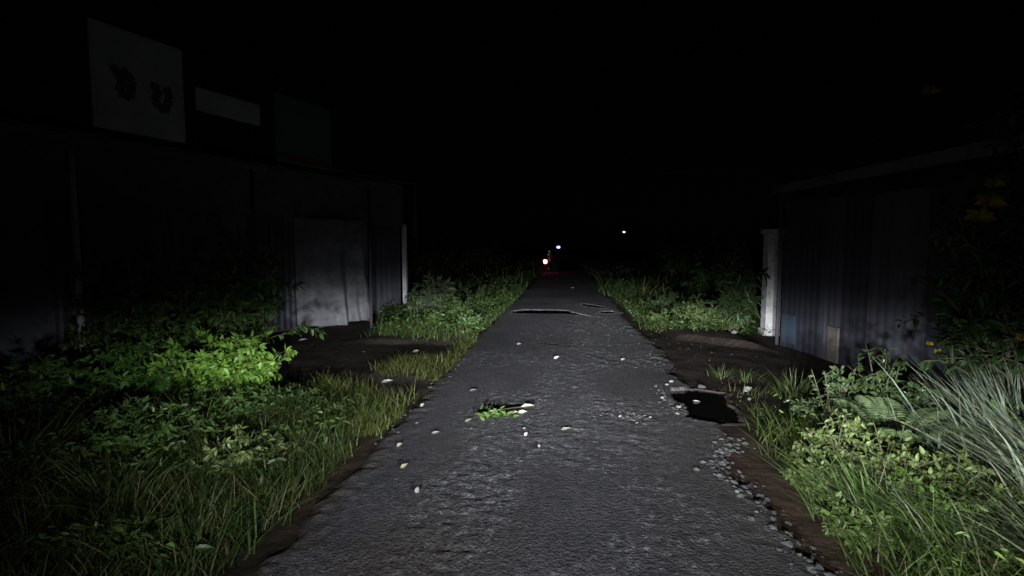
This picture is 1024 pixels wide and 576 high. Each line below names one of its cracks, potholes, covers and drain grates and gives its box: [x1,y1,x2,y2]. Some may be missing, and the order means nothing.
pothole [661,385,750,426]
